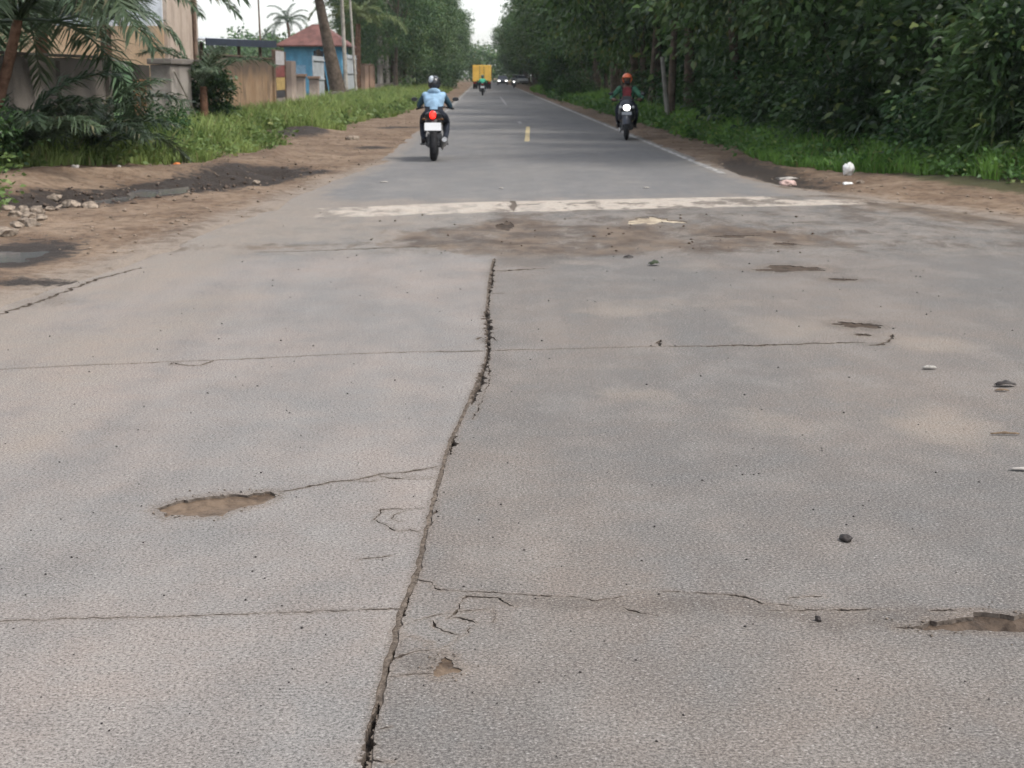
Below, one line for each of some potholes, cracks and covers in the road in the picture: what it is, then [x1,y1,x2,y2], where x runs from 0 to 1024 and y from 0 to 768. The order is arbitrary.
pothole [157,491,276,517]
pothole [896,612,1024,632]
crack [0,245,954,768]
pothole [433,657,462,677]
